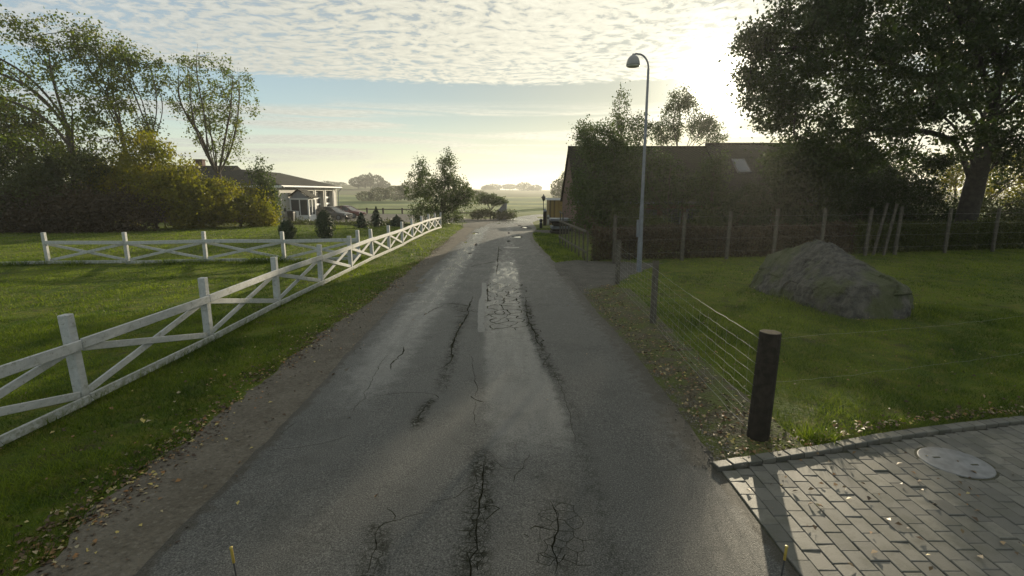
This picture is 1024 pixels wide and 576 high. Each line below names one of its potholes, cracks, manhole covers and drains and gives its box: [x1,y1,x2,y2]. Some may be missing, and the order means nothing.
manhole cover [914,446,1000,481]
crack [356,282,550,423]
crack [367,455,530,576]
crack [524,502,594,573]
